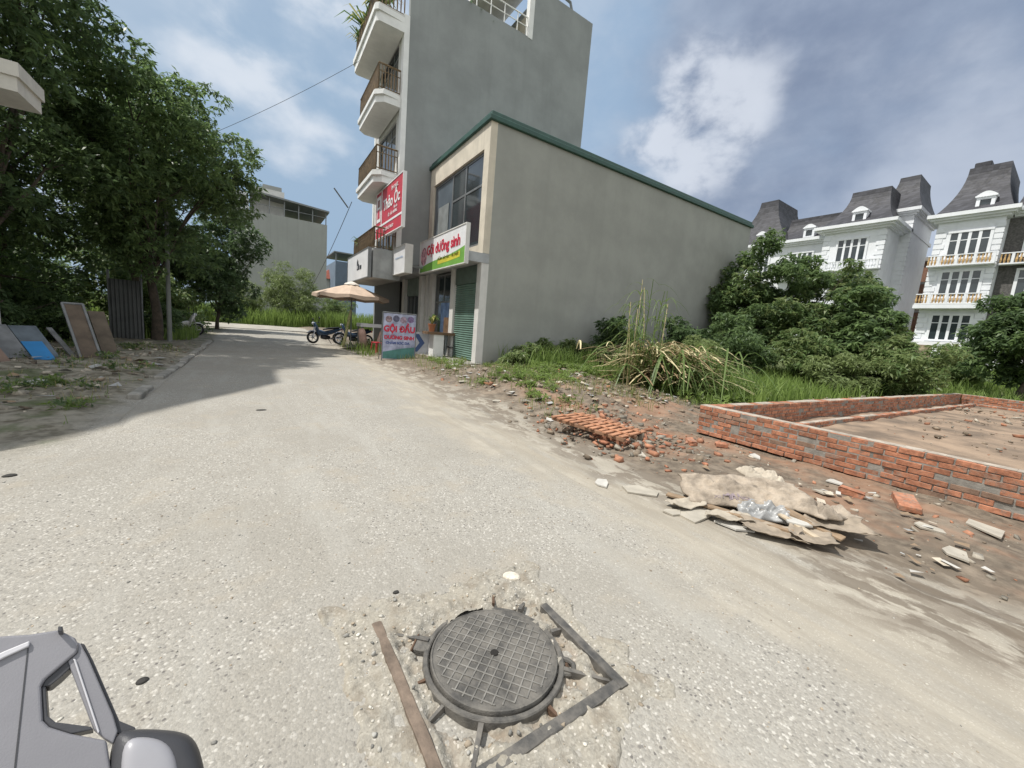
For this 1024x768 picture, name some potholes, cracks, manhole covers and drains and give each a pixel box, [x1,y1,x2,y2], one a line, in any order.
manhole cover [317,560,676,768]
